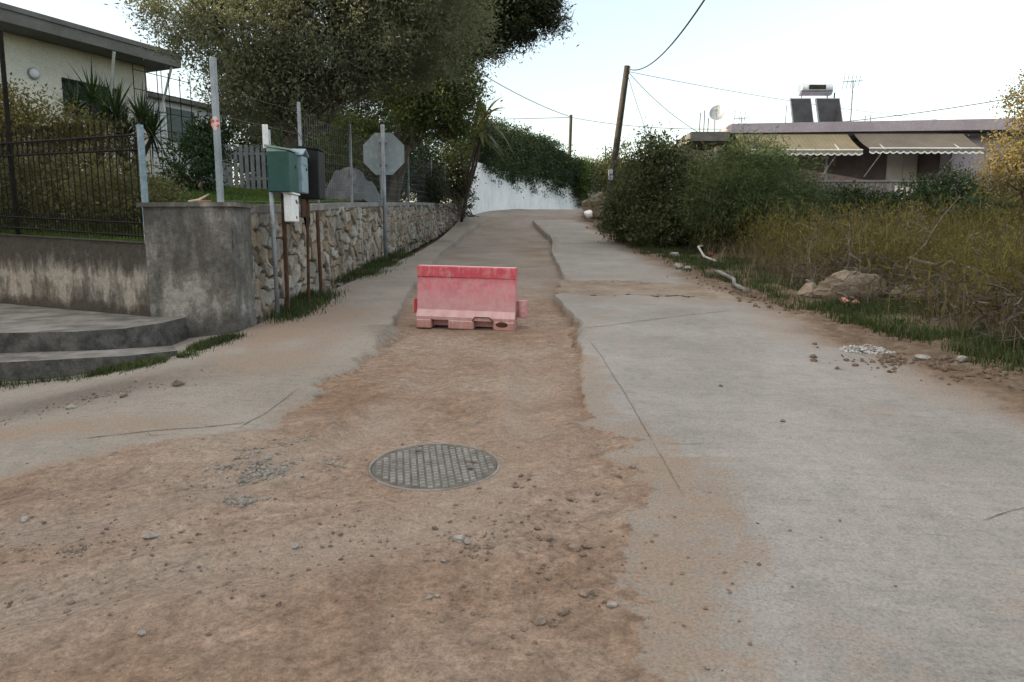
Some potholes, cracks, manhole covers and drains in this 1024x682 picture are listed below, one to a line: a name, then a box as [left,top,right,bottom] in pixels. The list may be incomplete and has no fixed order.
crack [74,390,296,440]
manhole cover [368,443,500,491]
